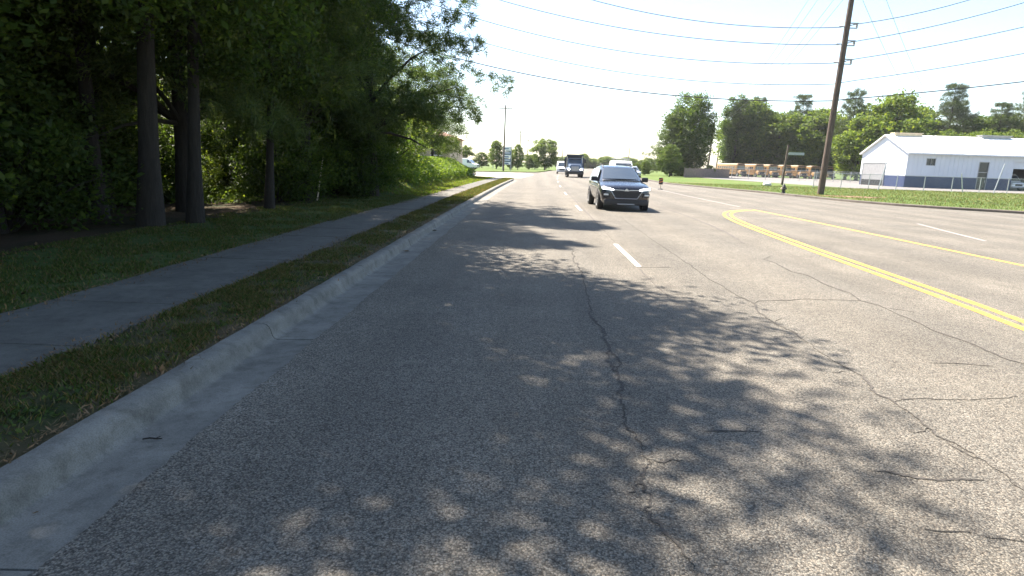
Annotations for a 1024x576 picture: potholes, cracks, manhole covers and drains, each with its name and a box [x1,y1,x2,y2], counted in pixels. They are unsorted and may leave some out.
crack [627,222,1024,490]
crack [572,250,695,569]
